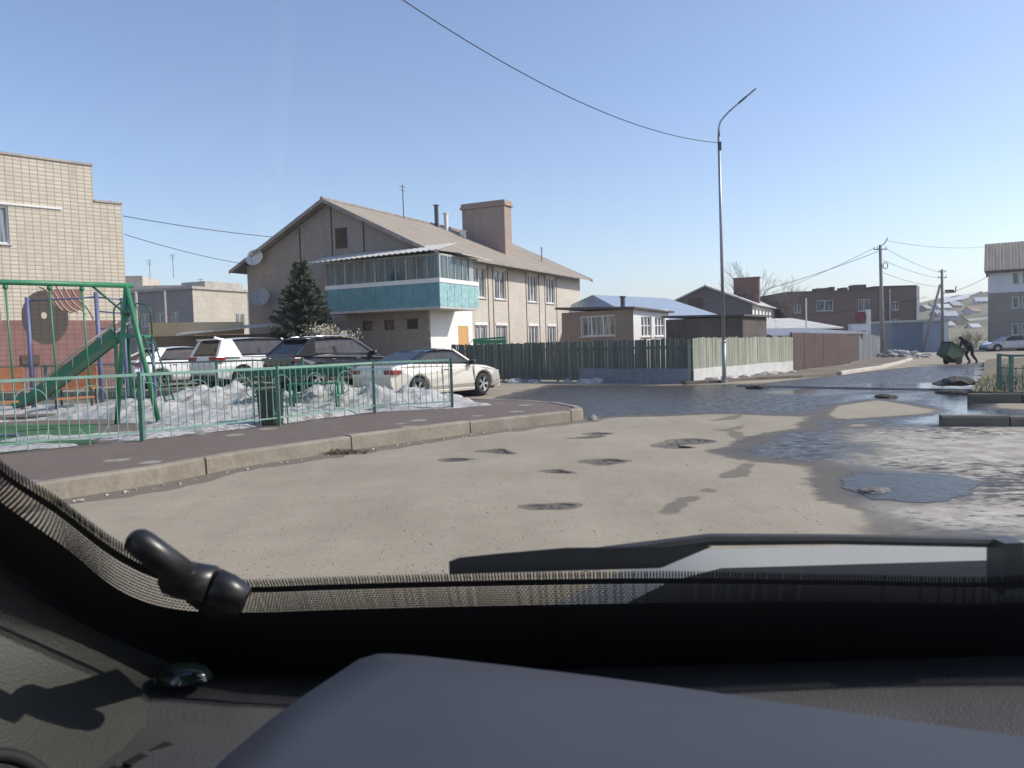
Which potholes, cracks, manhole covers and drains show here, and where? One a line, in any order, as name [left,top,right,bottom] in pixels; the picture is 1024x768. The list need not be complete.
pothole [654,439,714,448]
